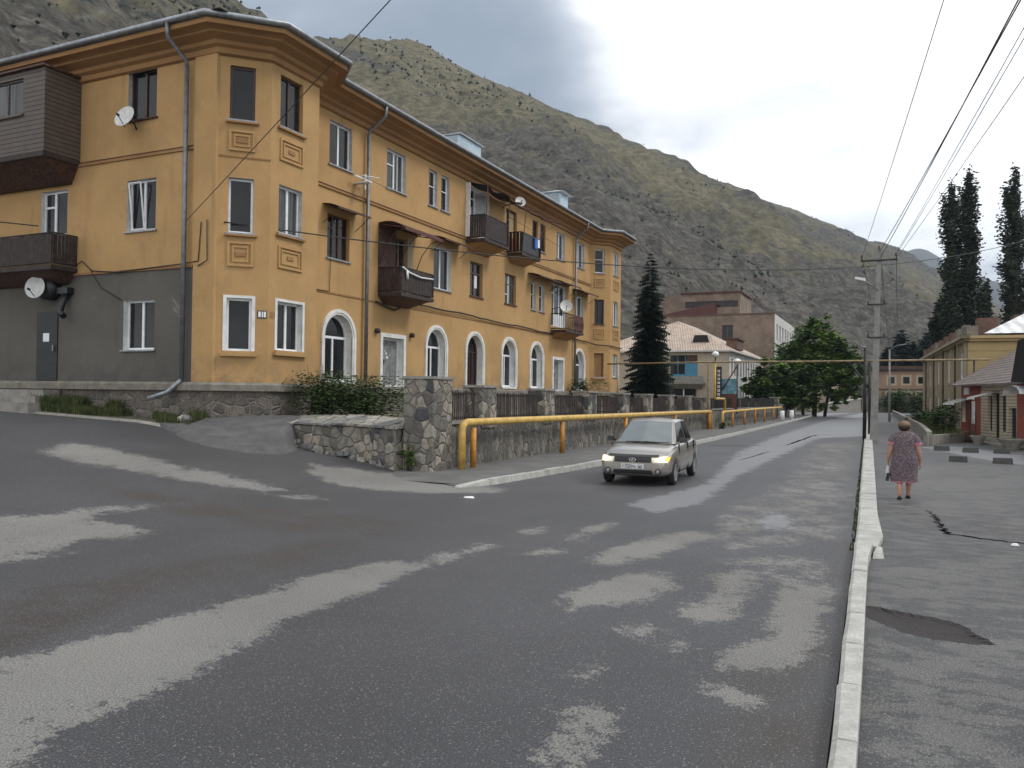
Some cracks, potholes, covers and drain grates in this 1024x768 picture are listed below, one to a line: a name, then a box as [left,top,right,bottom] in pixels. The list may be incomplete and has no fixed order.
crack [925,510,1024,544]
